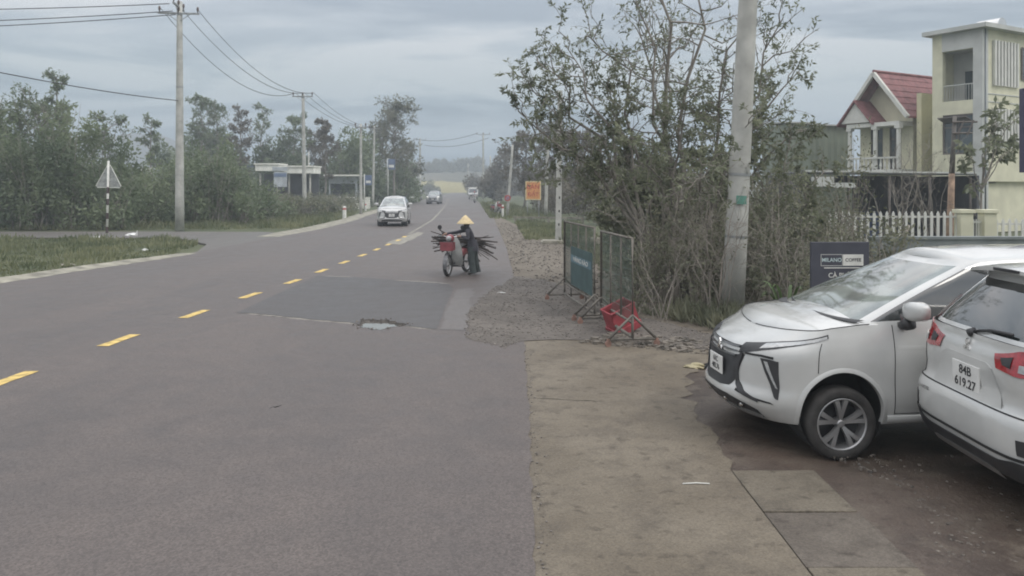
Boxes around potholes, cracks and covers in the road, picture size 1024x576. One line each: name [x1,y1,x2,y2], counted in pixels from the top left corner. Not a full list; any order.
pothole [352,318,413,330]
